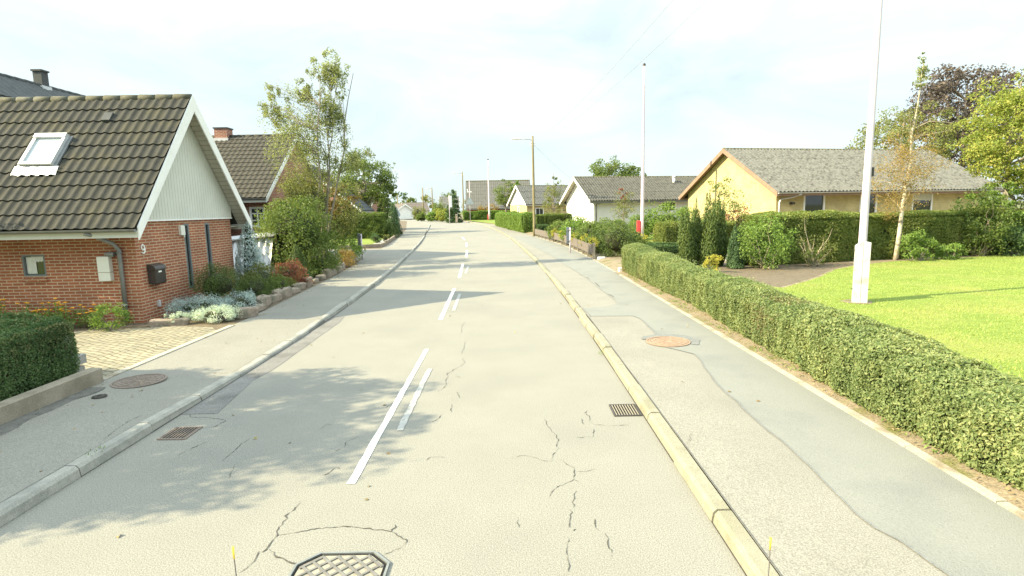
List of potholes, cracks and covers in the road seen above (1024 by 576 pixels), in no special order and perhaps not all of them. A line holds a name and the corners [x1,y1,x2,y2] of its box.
crack [517,418,592,571]
manhole cover [288,551,390,576]
crack [239,505,407,573]
drain grate [156,426,203,440]
drain grate [609,404,642,417]
manhole cover [646,336,691,347]
manhole cover [110,373,167,389]
